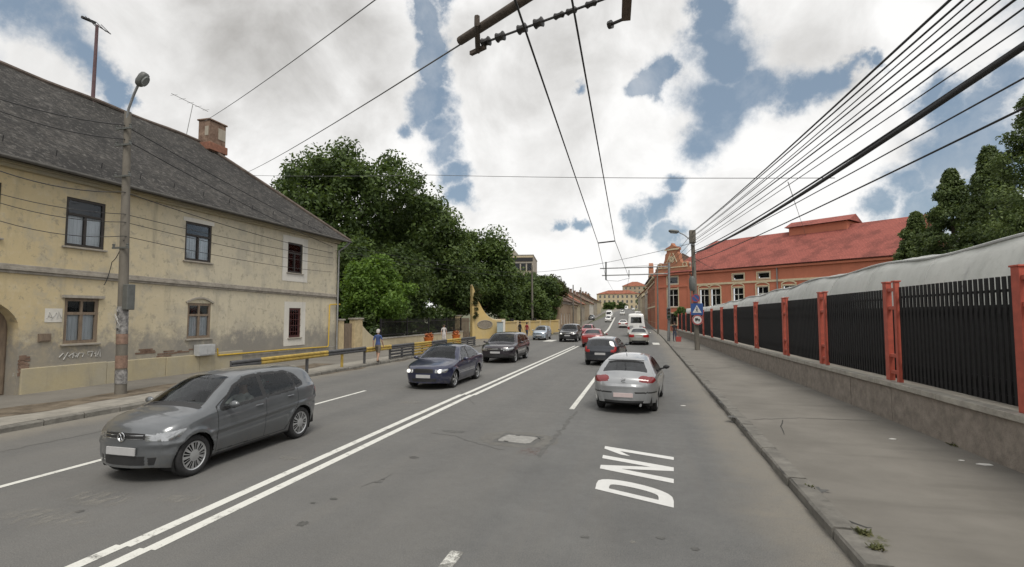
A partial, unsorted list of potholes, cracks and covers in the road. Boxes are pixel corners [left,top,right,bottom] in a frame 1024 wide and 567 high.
manhole cover [478,431,559,447]
